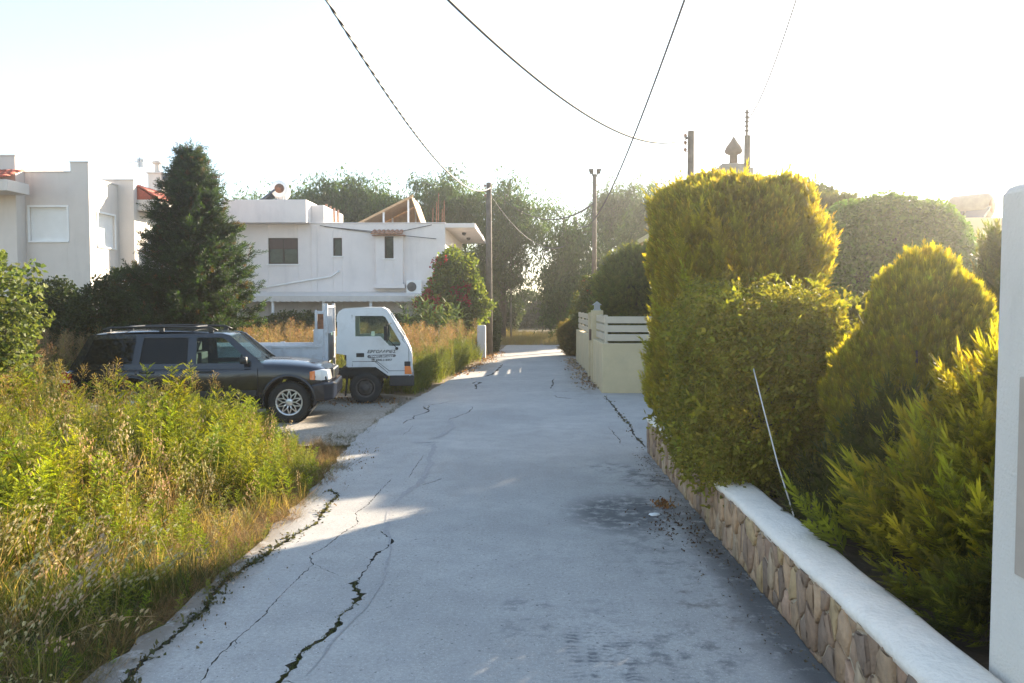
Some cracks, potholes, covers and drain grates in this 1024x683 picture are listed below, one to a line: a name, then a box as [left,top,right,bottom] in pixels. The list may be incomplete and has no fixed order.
crack [202,480,391,680]
